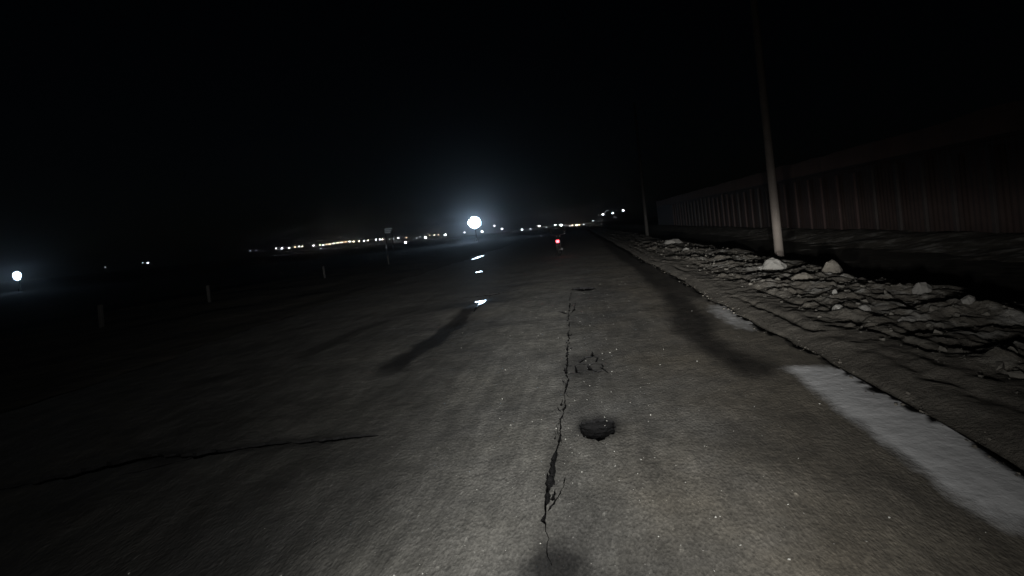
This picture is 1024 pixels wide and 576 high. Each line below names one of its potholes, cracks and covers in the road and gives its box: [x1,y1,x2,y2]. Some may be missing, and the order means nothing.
crack [541,292,608,565]
crack [0,434,379,490]
pothole [578,419,616,442]
